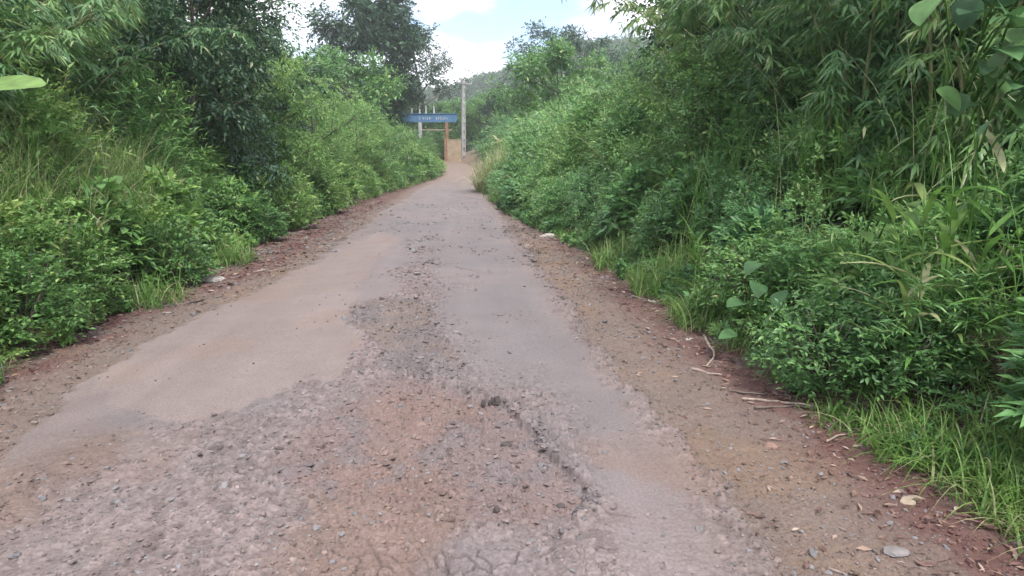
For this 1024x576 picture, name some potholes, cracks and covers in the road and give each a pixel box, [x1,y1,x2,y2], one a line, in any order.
pothole [343,295,465,377]
pothole [259,371,590,537]
crack [333,541,571,576]
